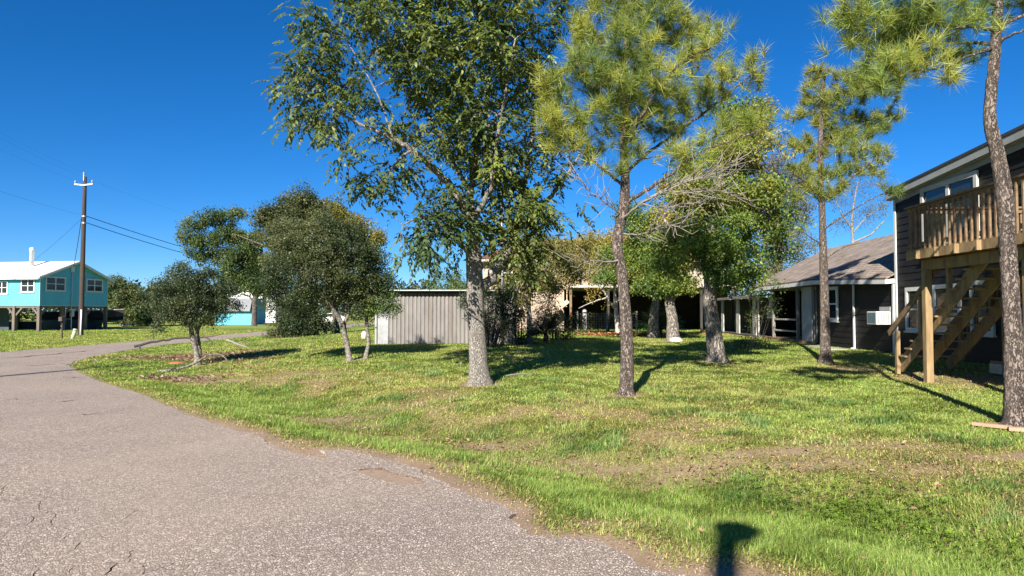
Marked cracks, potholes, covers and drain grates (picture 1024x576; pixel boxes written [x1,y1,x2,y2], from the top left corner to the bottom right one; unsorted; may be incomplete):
pothole [354,468,422,485]
